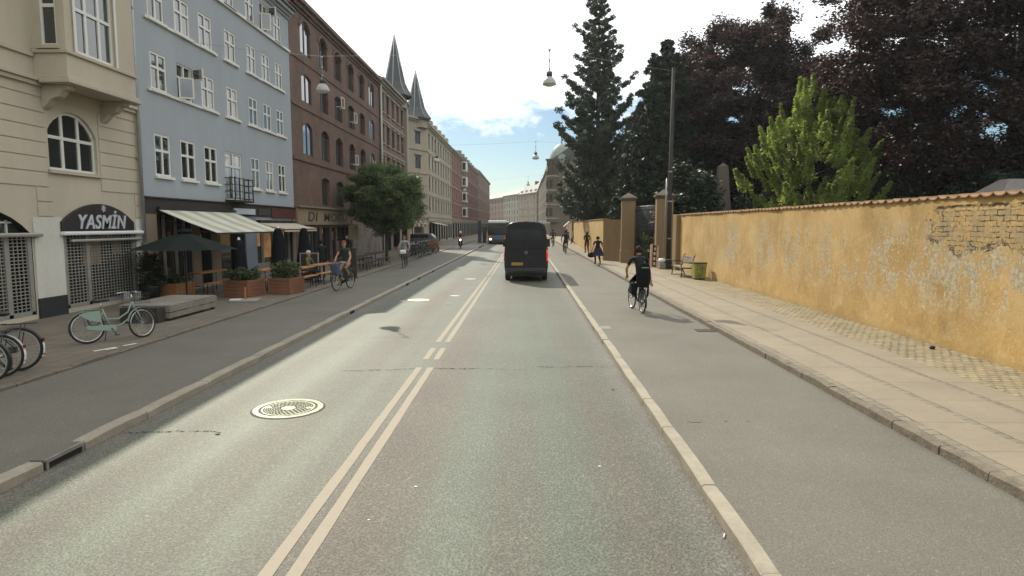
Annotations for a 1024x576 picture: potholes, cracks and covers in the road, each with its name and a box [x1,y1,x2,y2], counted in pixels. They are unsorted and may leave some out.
manhole cover [250,399,325,419]
